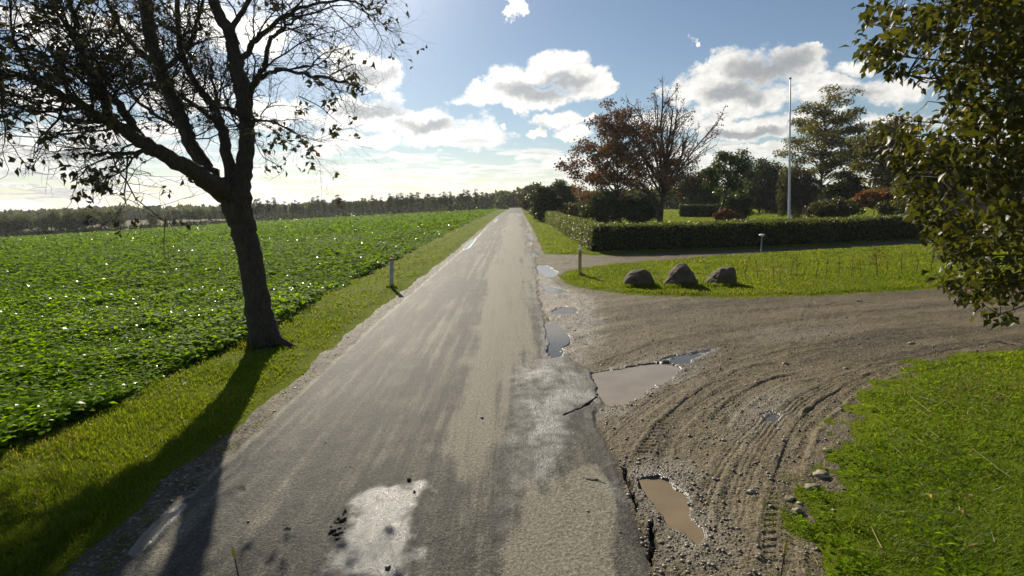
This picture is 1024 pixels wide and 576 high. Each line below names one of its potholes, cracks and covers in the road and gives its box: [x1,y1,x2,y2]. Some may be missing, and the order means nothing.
pothole [589,361,685,407]
pothole [635,473,710,547]
pothole [540,285,568,295]
pothole [551,306,581,315]
pothole [757,409,785,424]
crack [583,466,662,567]
pothole [324,507,349,544]
pothole [536,265,559,278]
crack [563,396,598,416]
pothole [542,324,572,358]
pothole [657,346,720,366]
